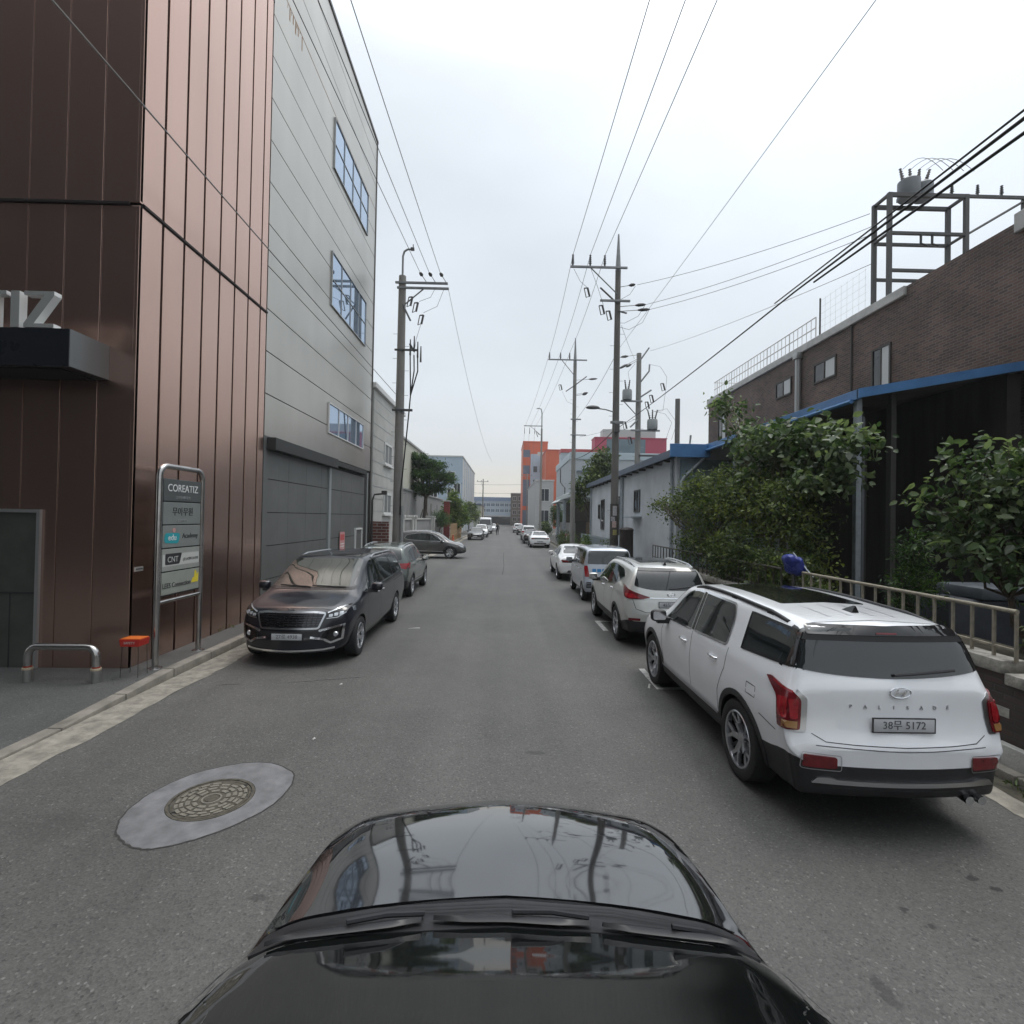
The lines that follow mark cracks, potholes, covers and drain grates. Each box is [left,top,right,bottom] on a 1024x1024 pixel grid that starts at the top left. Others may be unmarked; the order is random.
manhole cover [114,762,295,850]
